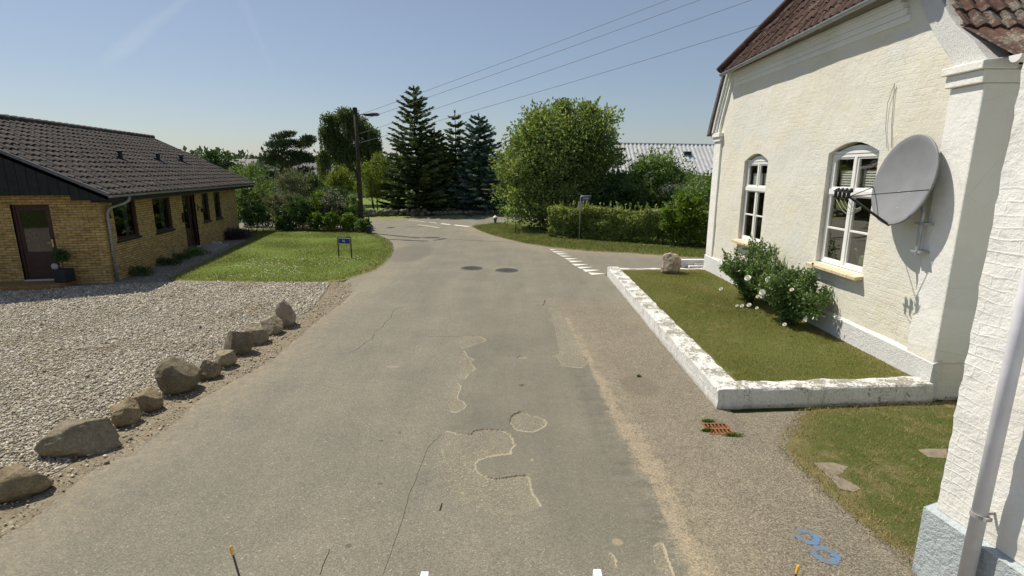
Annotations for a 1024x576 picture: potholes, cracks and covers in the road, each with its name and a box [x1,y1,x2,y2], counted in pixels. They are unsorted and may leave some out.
drain grate [701,423,733,435]
